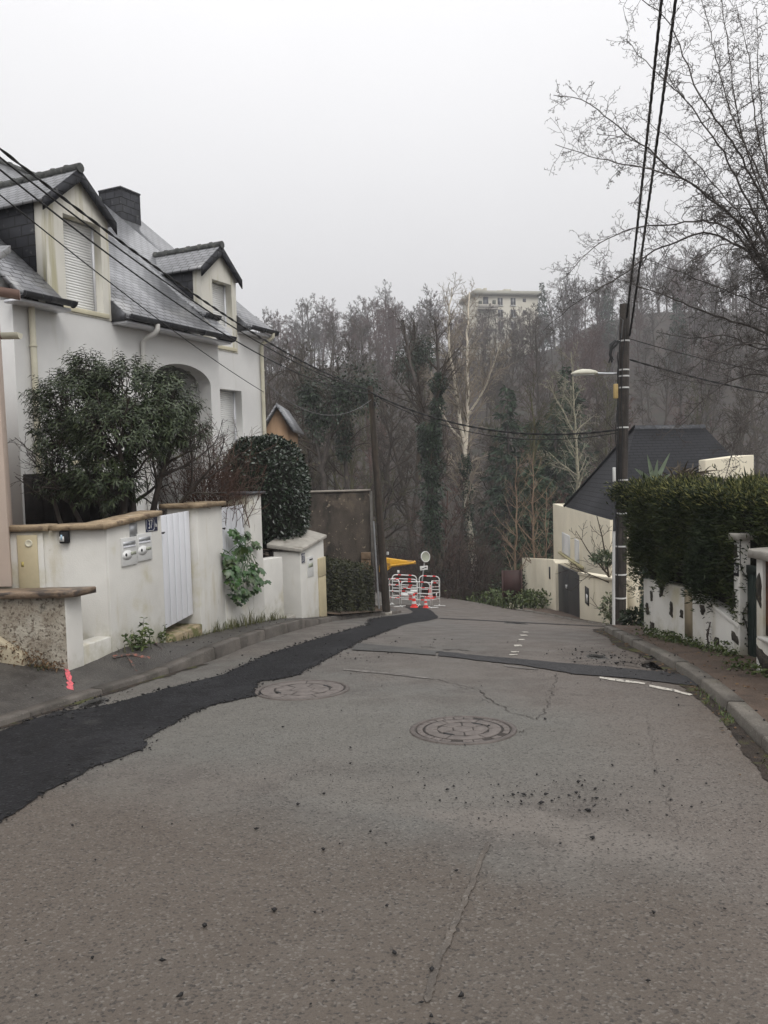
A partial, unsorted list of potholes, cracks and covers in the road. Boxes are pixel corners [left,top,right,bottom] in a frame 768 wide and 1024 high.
manhole cover [255,680,350,701]
crack [439,674,594,732]
manhole cover [410,715,517,745]
